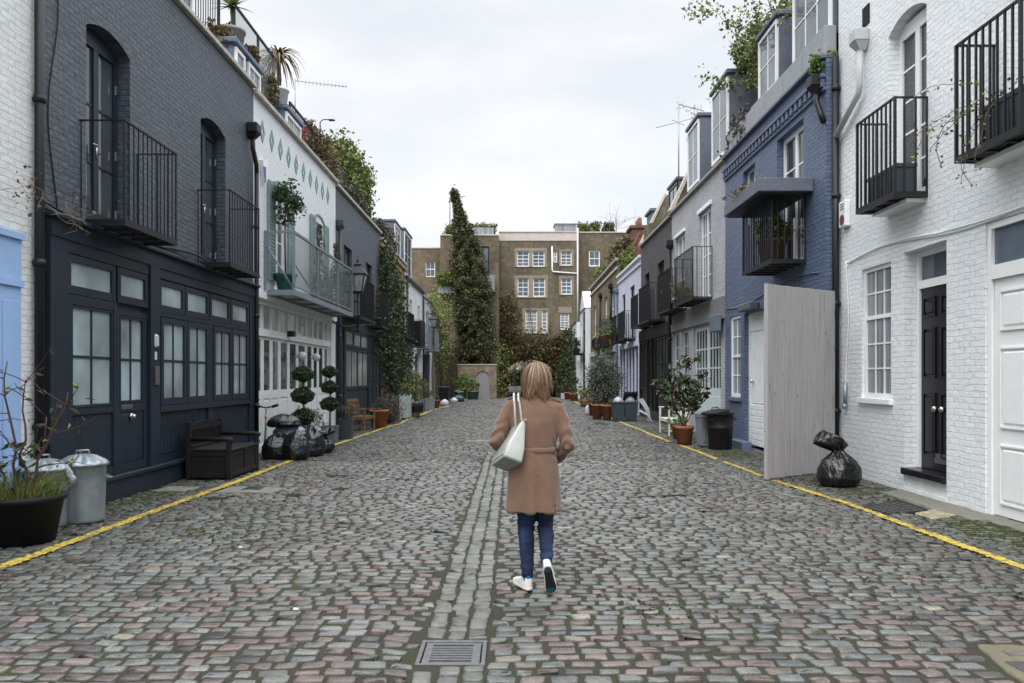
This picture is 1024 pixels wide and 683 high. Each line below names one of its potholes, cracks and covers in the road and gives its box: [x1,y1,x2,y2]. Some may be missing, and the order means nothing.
drain grate [414,640,487,666]
